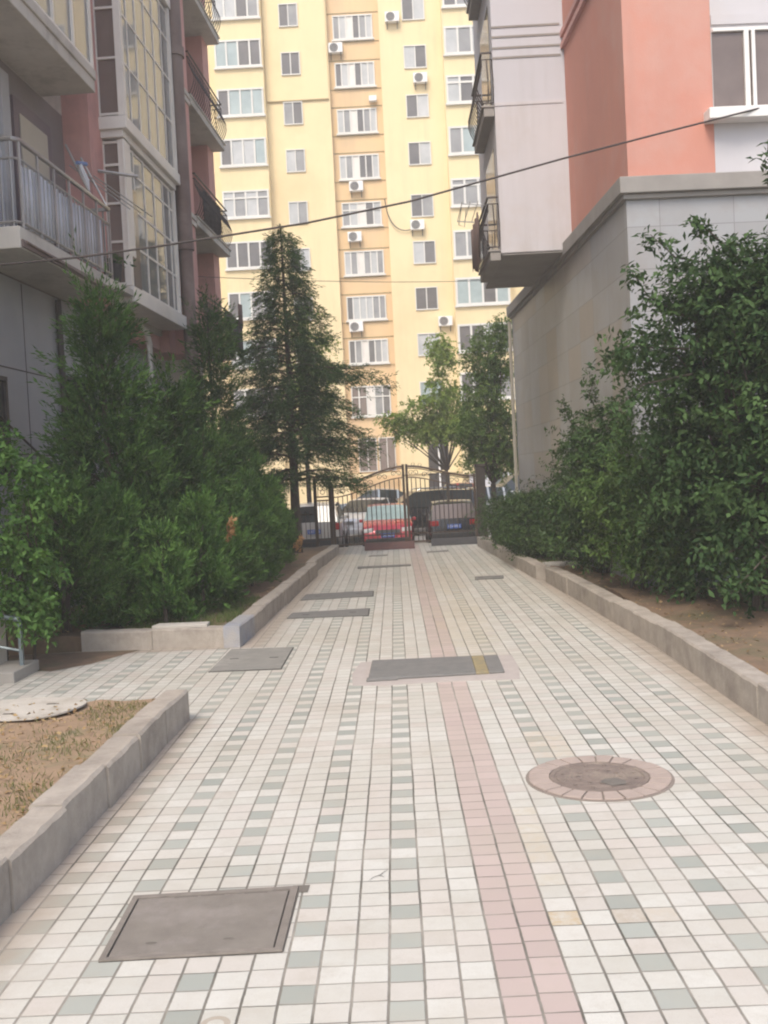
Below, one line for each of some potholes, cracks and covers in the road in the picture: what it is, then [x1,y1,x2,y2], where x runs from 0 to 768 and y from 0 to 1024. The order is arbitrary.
manhole cover [209,647,294,672]
manhole cover [98,885,310,963]
manhole cover [526,755,675,802]
